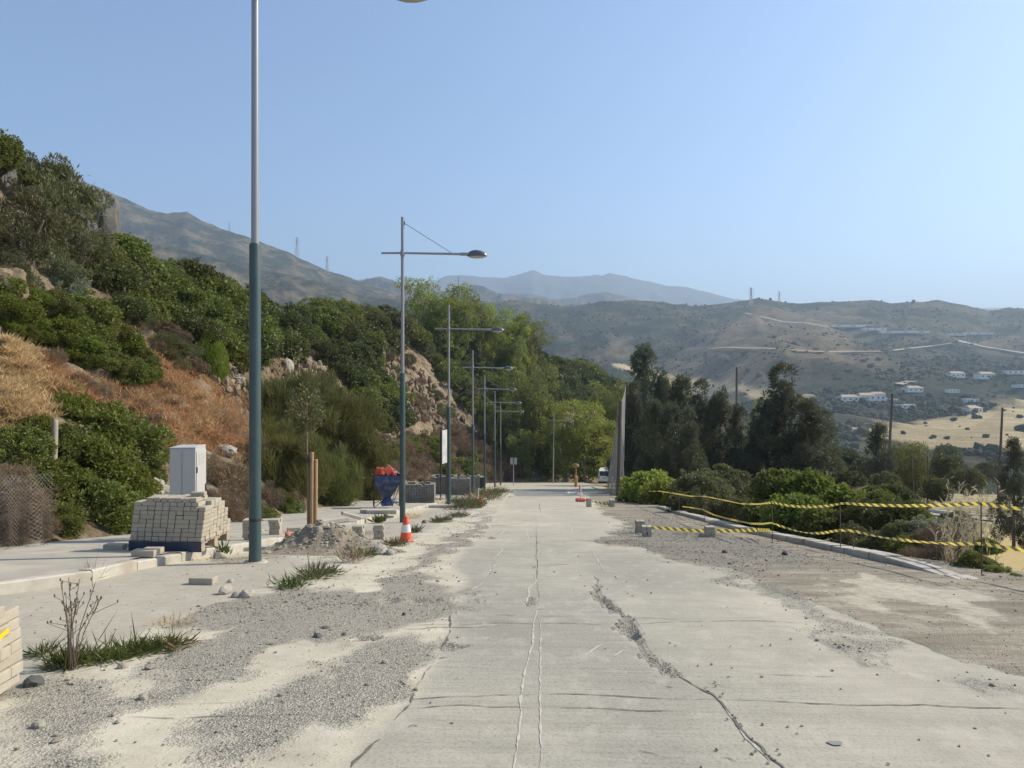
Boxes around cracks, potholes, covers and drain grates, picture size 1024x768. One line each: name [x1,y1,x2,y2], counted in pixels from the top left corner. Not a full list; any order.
crack [472,529,505,589]
crack [560,674,833,768]
crack [394,615,504,726]
crack [590,549,623,614]
